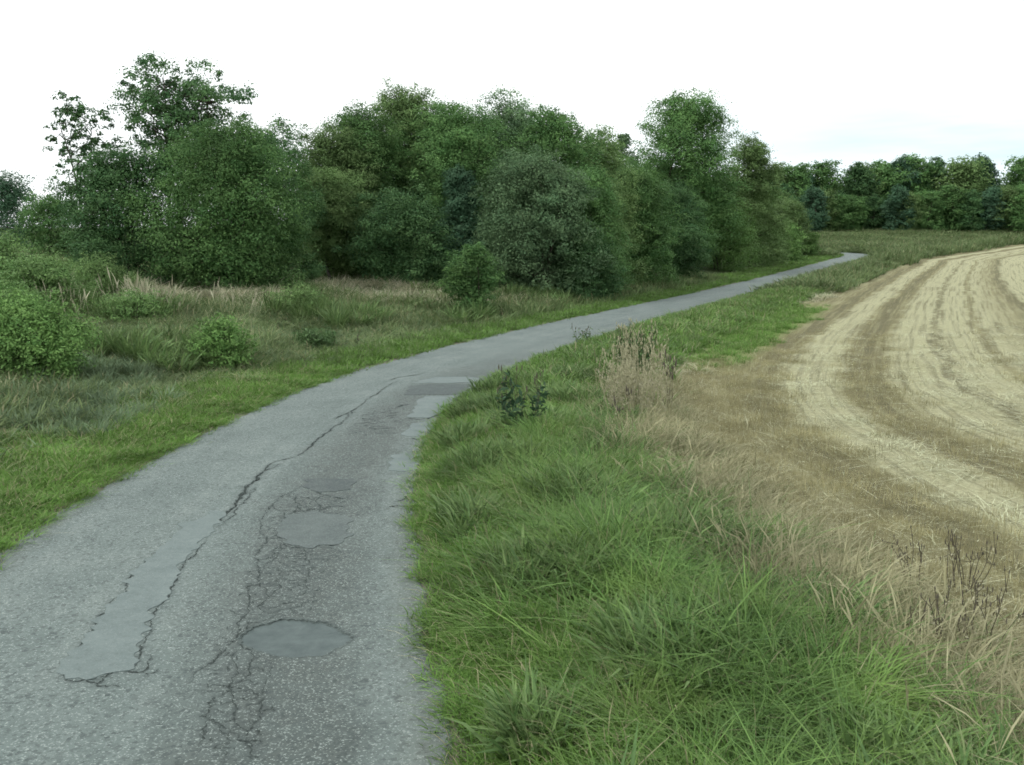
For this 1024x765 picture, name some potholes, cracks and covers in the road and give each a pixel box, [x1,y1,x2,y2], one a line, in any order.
crack [213,373,472,528]
crack [193,490,348,761]
crack [63,540,207,687]
